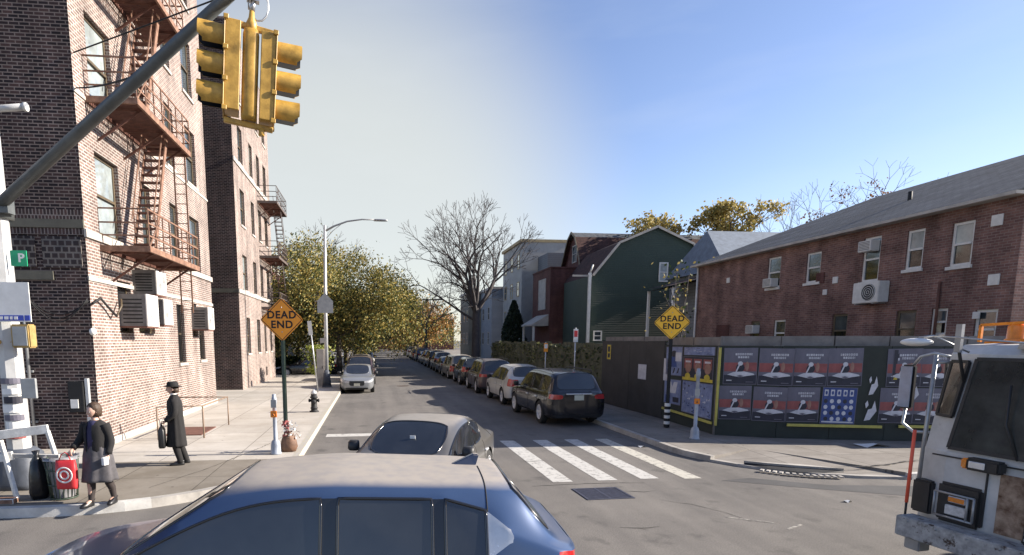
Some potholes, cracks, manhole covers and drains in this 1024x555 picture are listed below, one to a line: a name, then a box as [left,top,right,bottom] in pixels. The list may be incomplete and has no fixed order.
drain grate [744,461,844,478]
manhole cover [572,487,635,500]
